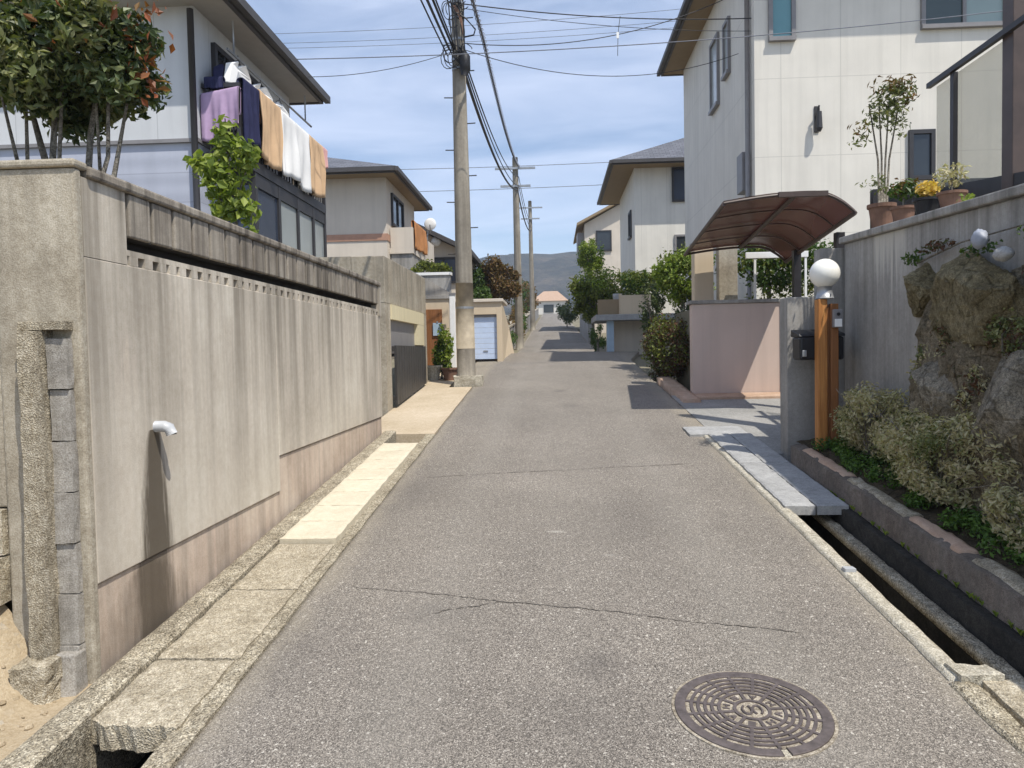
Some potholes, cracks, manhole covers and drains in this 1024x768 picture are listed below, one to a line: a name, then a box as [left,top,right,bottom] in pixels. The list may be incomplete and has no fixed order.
manhole cover [671,671,838,760]
crack [355,586,804,633]
crack [434,463,687,477]
